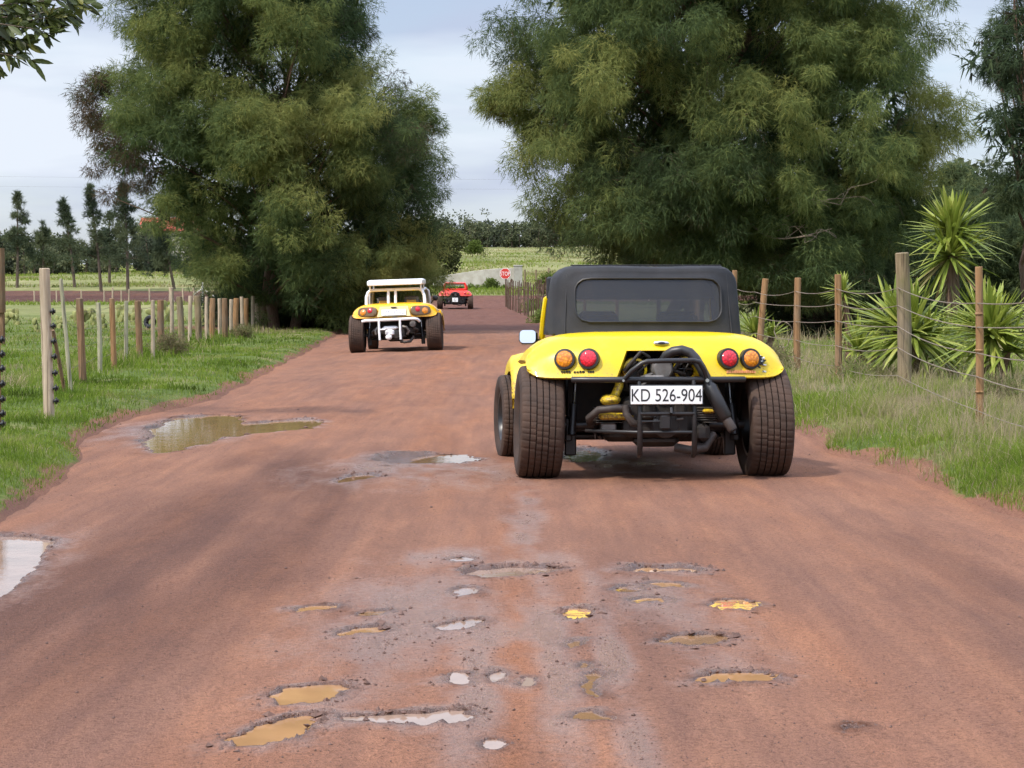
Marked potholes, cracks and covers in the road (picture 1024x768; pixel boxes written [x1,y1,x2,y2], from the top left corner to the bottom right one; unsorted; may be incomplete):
pothole [479,666,526,686]
pothole [543,603,614,623]
pothole [550,705,633,725]
pothole [690,597,776,614]
pothole [249,675,378,710]
pothole [640,628,749,651]
pothole [442,560,578,581]
pothole [113,413,346,456]
pothole [206,707,344,752]
pothole [677,665,798,687]
pothole [279,600,358,615]
pothole [343,449,501,466]
